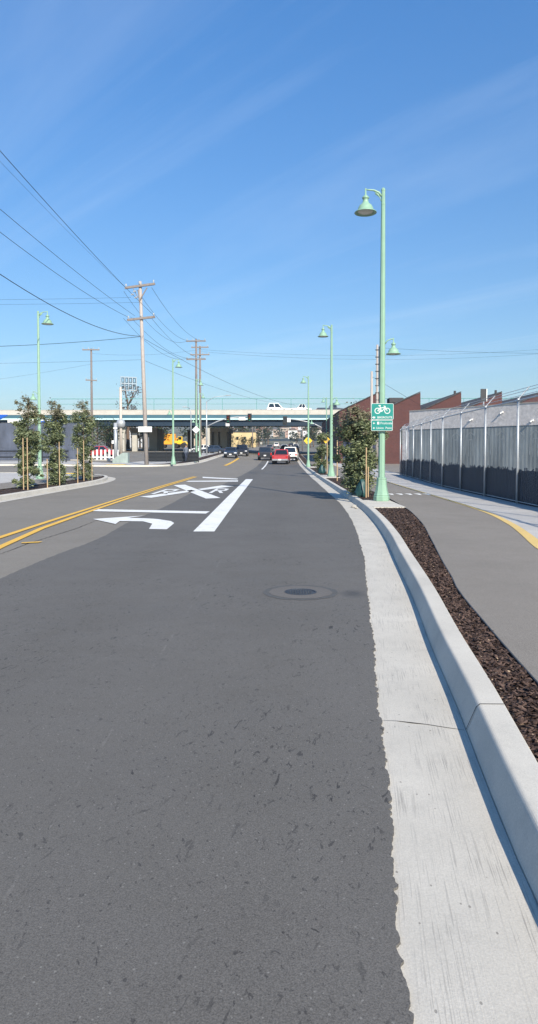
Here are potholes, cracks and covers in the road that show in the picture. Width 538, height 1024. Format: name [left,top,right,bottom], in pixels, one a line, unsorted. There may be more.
manhole cover [263,585,338,600]
